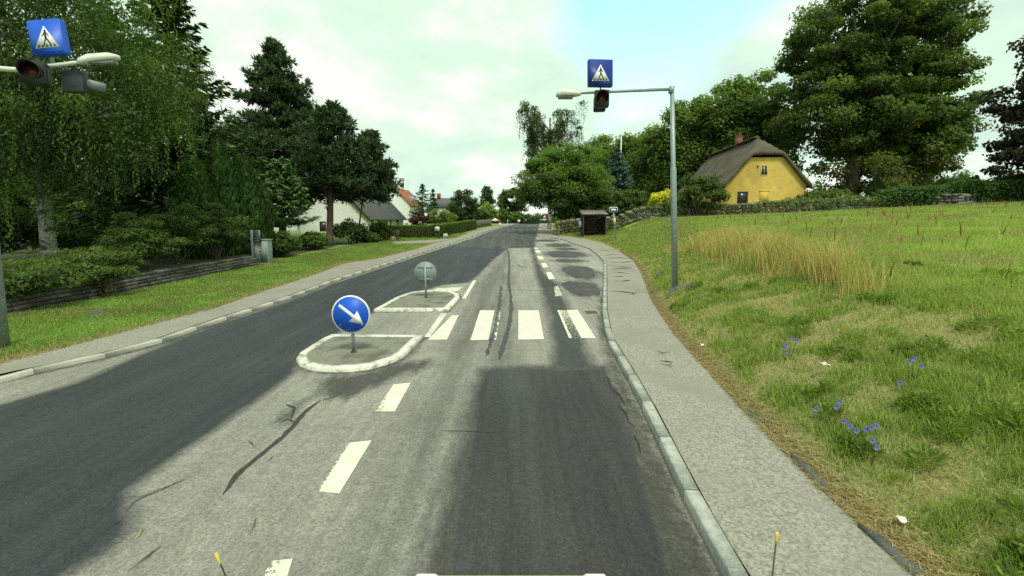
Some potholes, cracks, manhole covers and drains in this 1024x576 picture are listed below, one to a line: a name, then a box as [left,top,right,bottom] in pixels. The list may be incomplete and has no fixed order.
crack [607,377,641,451]
crack [124,478,186,513]
